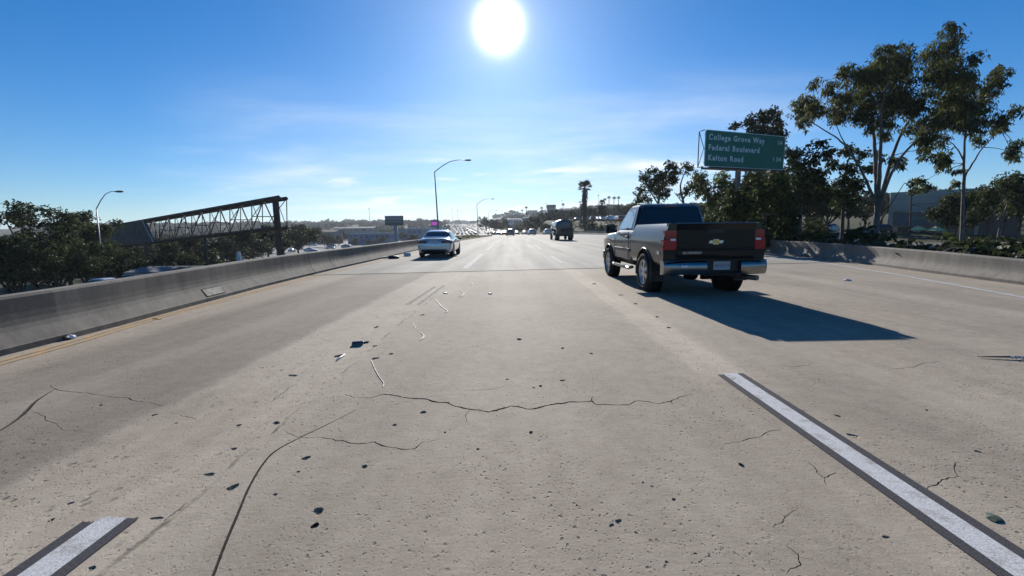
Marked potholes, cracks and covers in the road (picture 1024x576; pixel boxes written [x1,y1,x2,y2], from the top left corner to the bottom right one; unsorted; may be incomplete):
crack [345,387,686,422]
crack [287,432,433,450]
crack [926,462,966,489]
